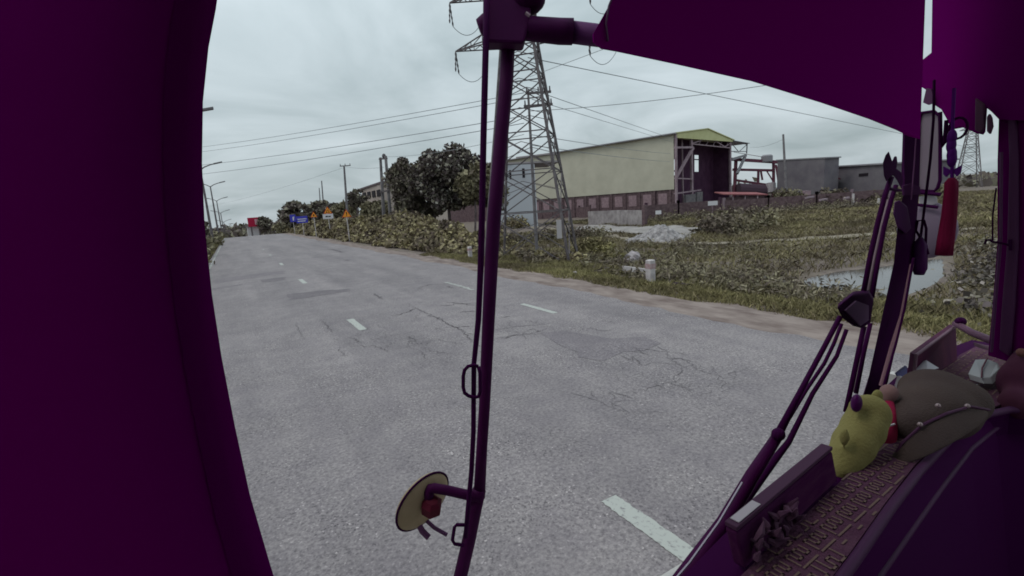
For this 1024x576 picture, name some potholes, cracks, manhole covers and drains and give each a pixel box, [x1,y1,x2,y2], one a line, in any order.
crack [577,347,780,419]
crack [295,284,480,359]
